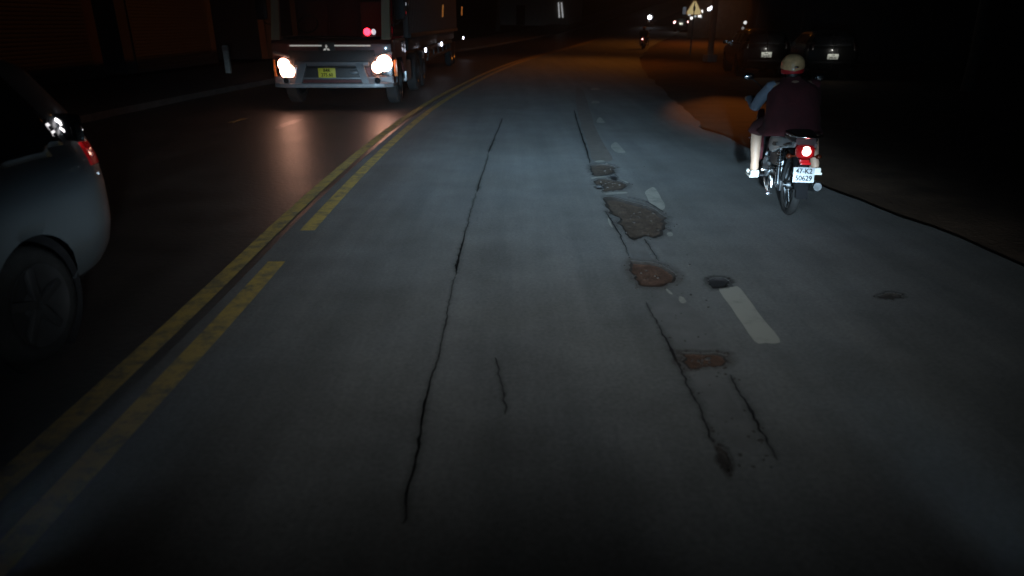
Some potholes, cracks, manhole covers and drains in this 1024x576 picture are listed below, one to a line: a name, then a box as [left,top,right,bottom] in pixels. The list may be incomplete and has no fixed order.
pothole [682,352,728,369]
crack [574,110,590,163]
crack [646,302,778,460]
pothole [715,445,731,473]
pothole [590,164,615,176]
pothole [603,196,667,240]
pothole [594,178,627,192]
crack [495,358,507,414]
pothole [706,276,733,289]
pothole [629,261,676,287]
crack [605,197,671,261]
